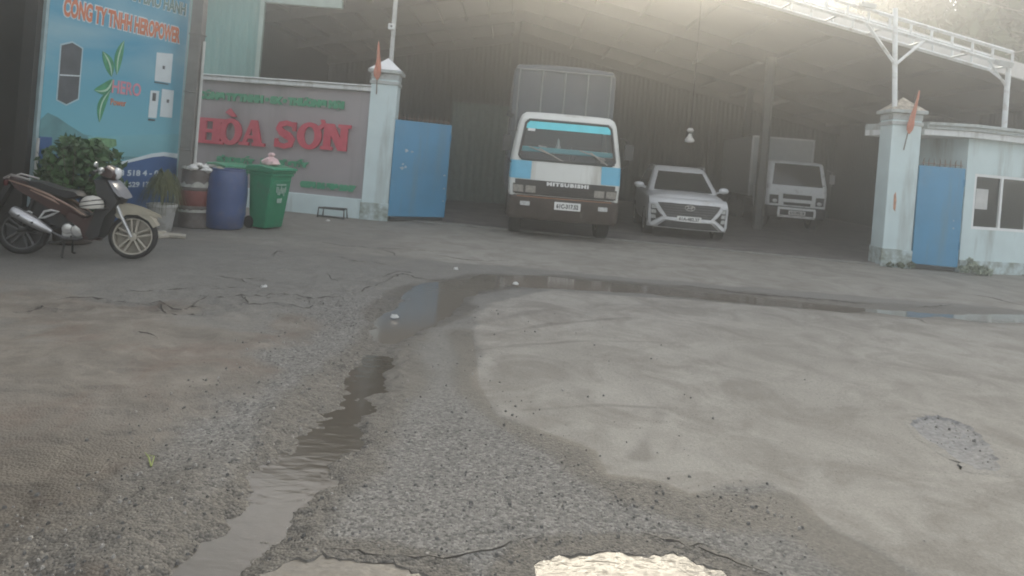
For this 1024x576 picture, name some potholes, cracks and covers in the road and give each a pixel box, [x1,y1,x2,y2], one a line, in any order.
pothole [246,545,444,576]
crack [14,242,509,339]
pothole [509,541,739,576]
crack [319,534,544,567]
pothole [900,412,1012,477]
